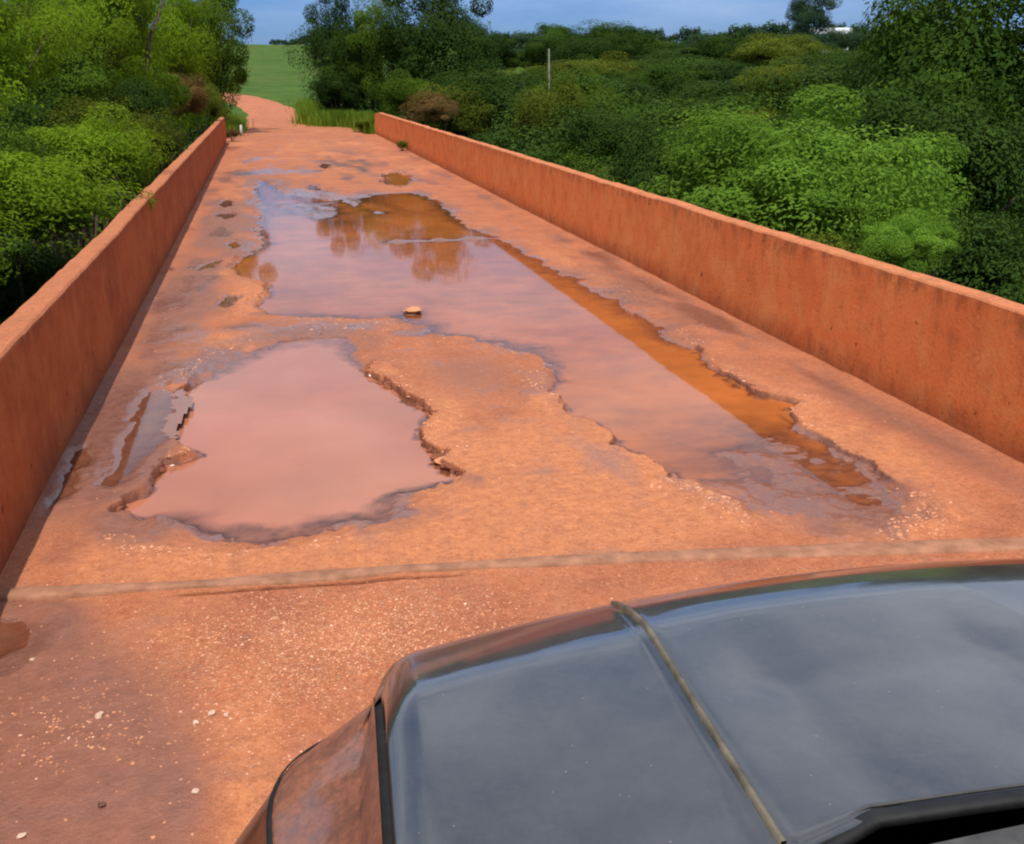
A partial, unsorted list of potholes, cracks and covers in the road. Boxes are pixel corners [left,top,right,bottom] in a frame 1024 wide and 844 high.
pothole [211,291,245,313]
pothole [208,211,239,219]
pothole [371,170,425,187]
pothole [94,323,483,568]
pothole [186,258,226,271]
pothole [211,198,238,207]
pothole [224,176,943,546]
